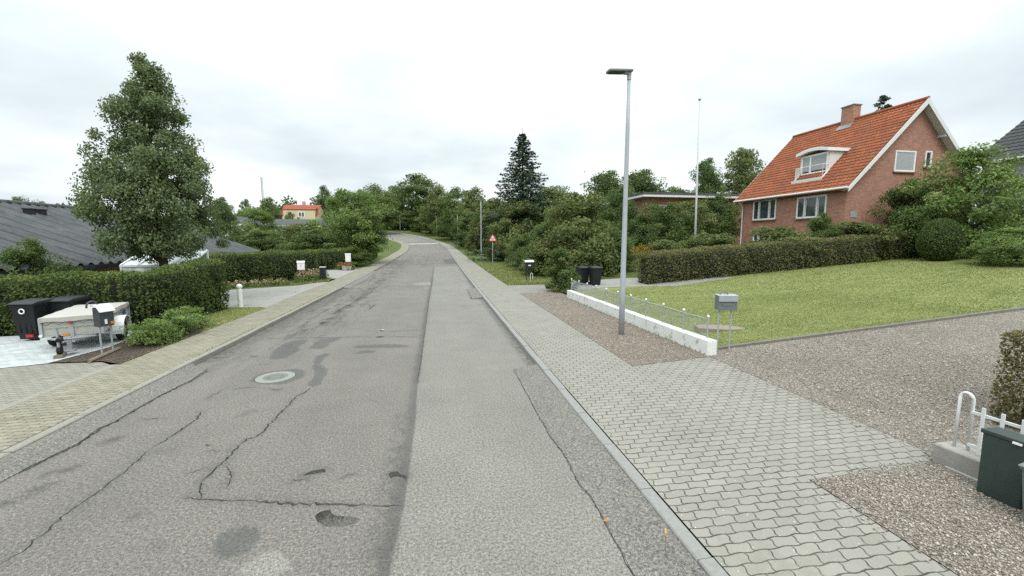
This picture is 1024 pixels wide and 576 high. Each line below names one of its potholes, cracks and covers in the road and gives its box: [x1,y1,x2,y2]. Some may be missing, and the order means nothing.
crack [513,371,634,576]
pothole [315,509,360,527]
crack [0,370,402,564]
manhole cover [254,371,296,383]
